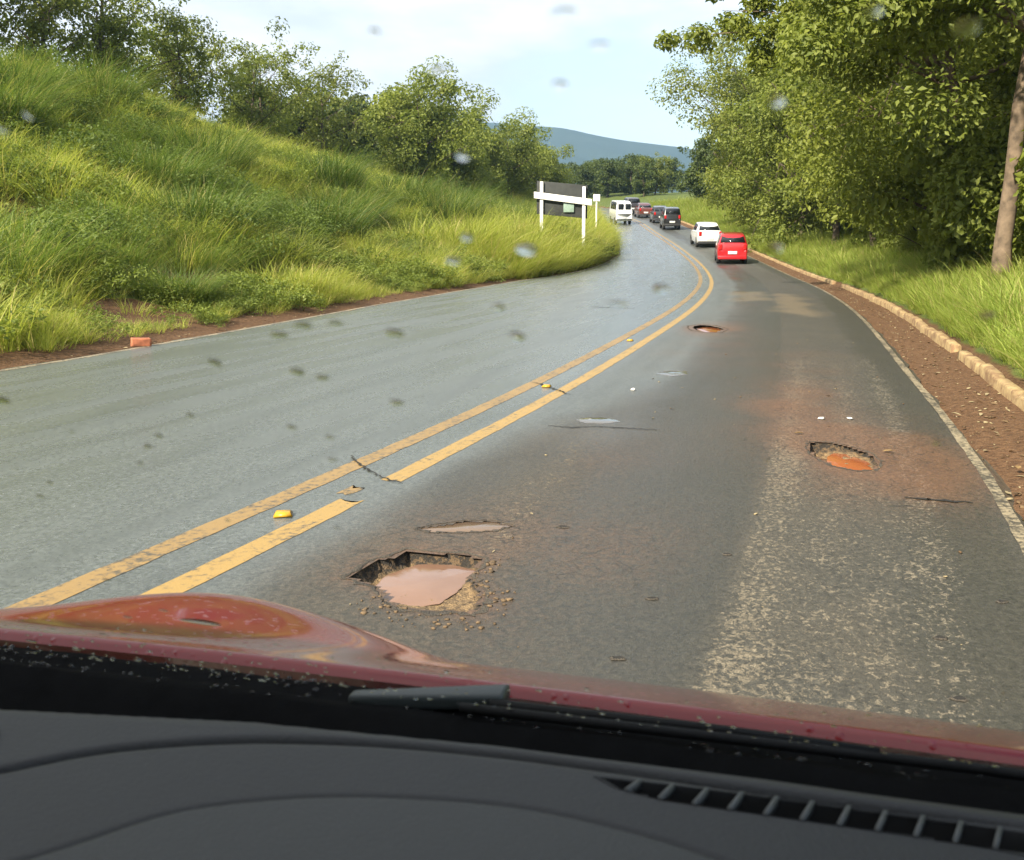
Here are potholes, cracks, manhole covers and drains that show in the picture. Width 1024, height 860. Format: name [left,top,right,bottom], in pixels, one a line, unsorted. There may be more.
pothole [412,519,515,533]
crack [351,455,401,483]
pothole [338,547,516,632]
pothole [688,324,728,333]
pothole [804,441,893,472]
